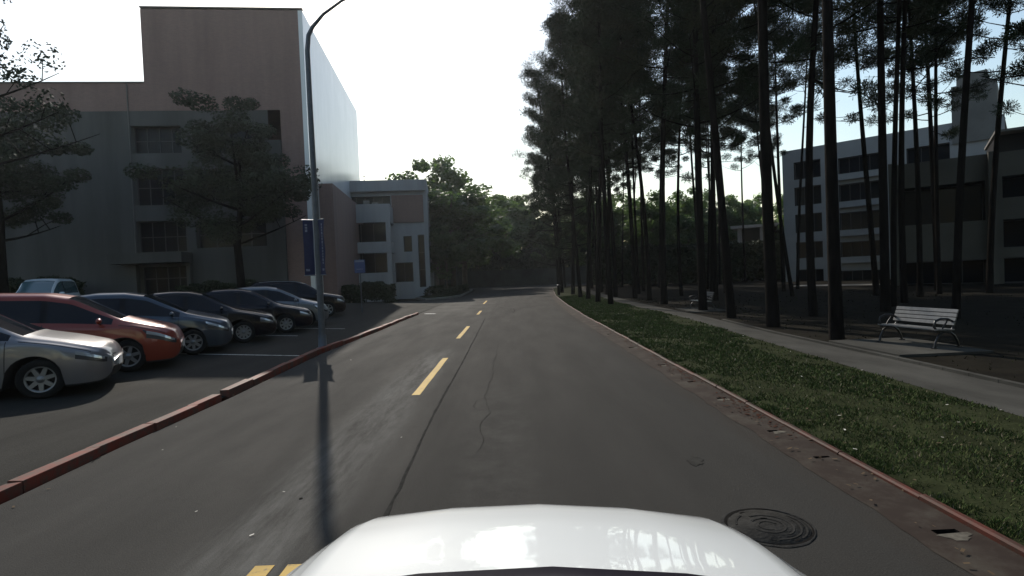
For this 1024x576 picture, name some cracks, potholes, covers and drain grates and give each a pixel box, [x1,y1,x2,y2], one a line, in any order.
pothole [687,456,704,466]
manhole cover [720,508,817,548]
crack [473,348,498,454]
